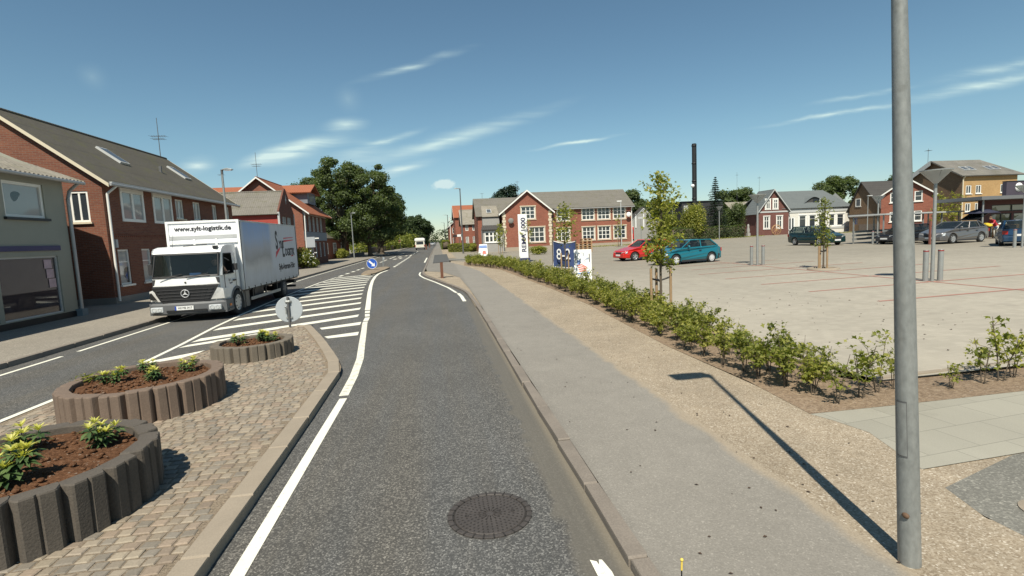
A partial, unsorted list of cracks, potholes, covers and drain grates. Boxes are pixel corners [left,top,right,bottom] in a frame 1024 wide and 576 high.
manhole cover [447,491,532,539]
